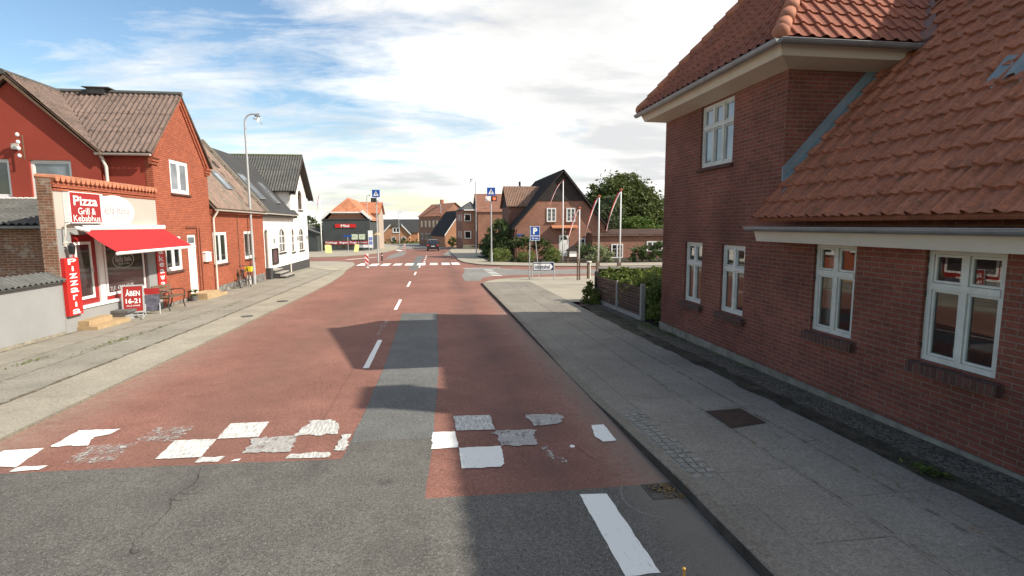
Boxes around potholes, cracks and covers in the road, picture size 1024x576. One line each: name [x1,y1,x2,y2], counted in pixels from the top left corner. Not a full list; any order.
drain grate [641,482,684,500]
manhole cover [706,408,766,428]
crack [129,466,202,561]
